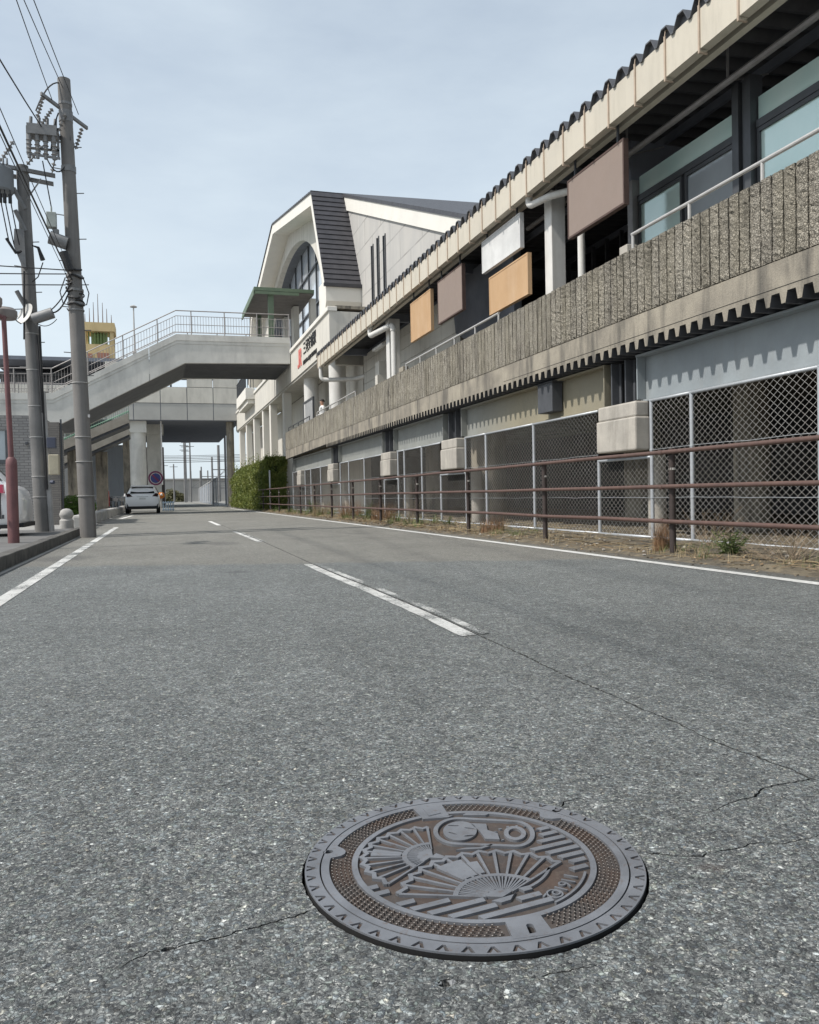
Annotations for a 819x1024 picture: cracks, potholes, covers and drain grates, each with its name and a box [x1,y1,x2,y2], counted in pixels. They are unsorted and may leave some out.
crack [122,910,313,967]
crack [648,835,818,857]
crack [212,521,819,816]
manhole cover [302,796,650,962]
